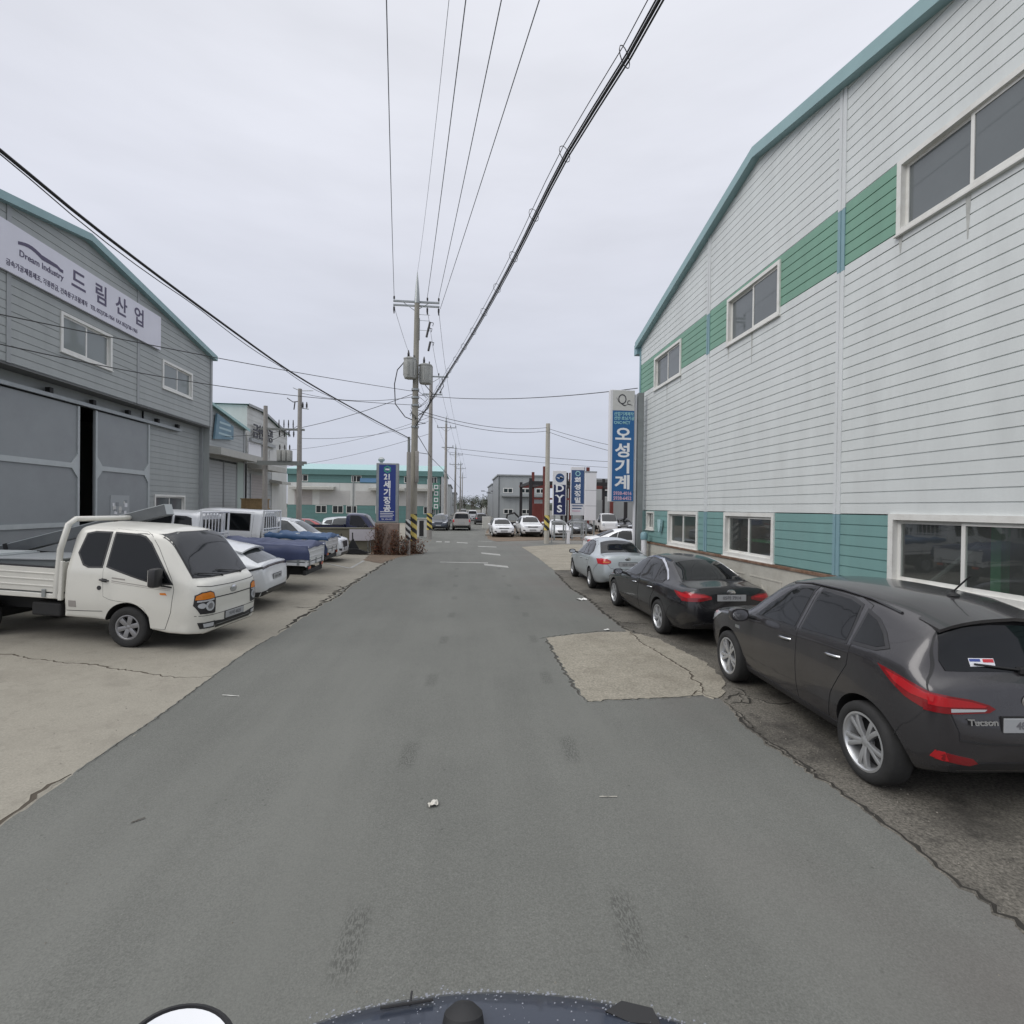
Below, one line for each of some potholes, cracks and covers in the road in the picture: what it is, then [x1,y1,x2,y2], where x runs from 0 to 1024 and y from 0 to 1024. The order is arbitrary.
crack [541,572,1024,934]
crack [0,654,212,679]
